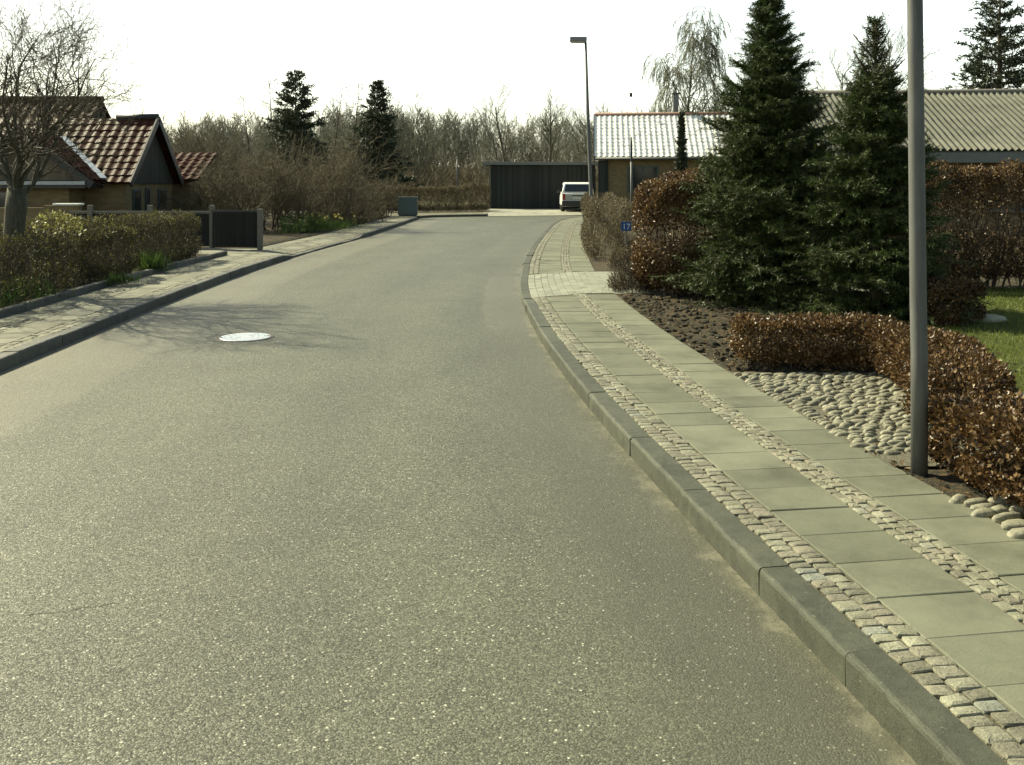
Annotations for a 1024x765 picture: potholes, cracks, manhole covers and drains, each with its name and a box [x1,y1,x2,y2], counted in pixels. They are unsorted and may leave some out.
manhole cover [215,332,275,342]
